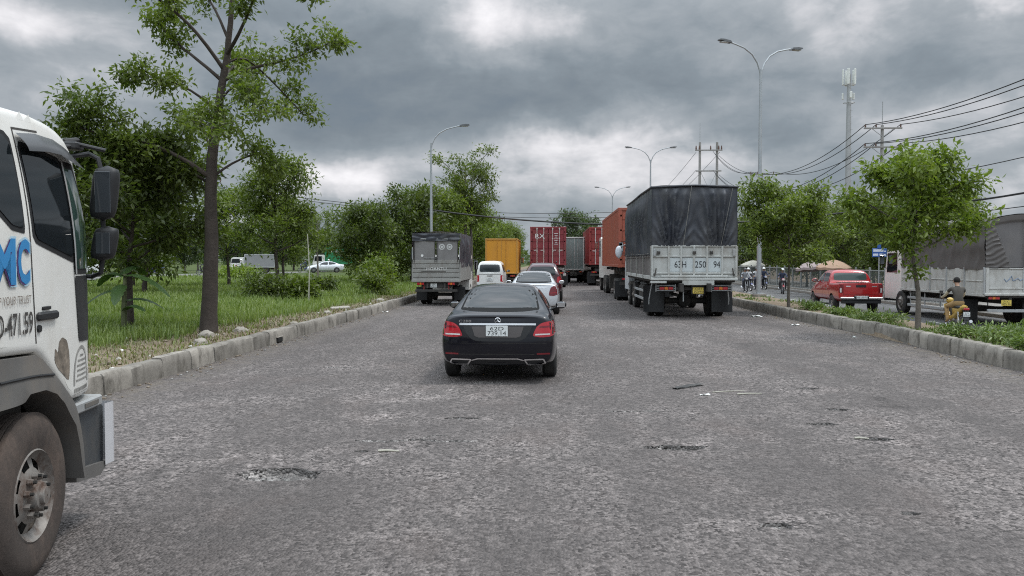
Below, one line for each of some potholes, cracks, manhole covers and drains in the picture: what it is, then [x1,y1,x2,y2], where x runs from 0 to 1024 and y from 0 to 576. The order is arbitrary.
crack [356,435,476,443]
pothole [237,468,321,481]
